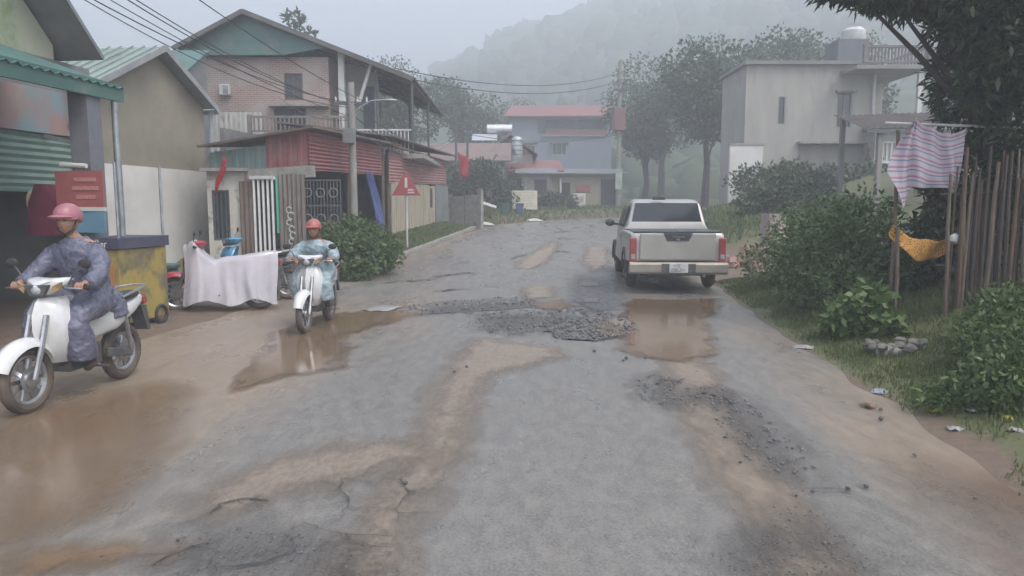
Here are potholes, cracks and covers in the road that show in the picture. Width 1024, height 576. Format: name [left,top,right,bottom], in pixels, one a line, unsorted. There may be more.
pothole [661,391,691,403]
pothole [428,301,522,314]
pothole [515,241,560,269]
crack [113,475,457,573]
pothole [546,310,620,341]
